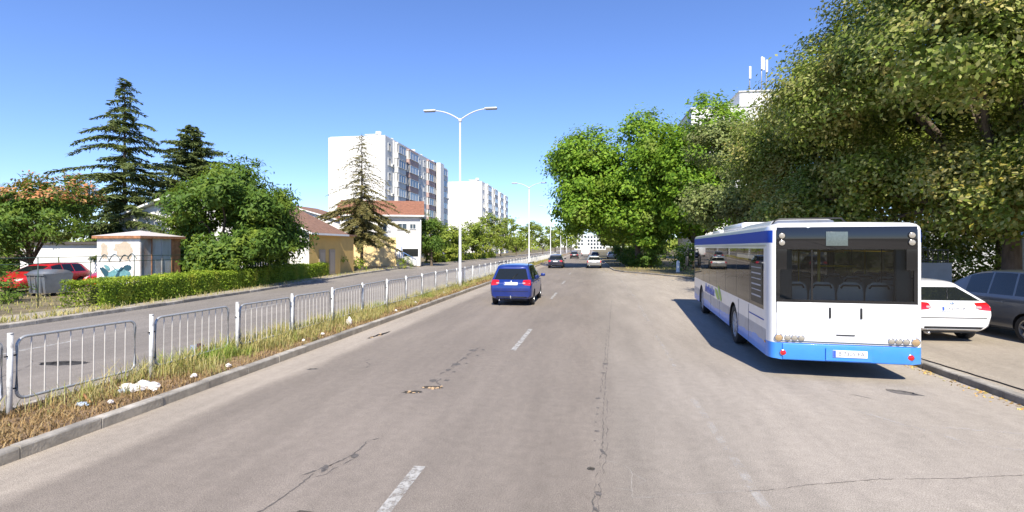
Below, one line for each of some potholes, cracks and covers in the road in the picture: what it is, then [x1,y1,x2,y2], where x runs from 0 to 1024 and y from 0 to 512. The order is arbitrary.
crack [429,346,484,385]
crack [257,438,378,512]
crack [610,461,1021,498]
